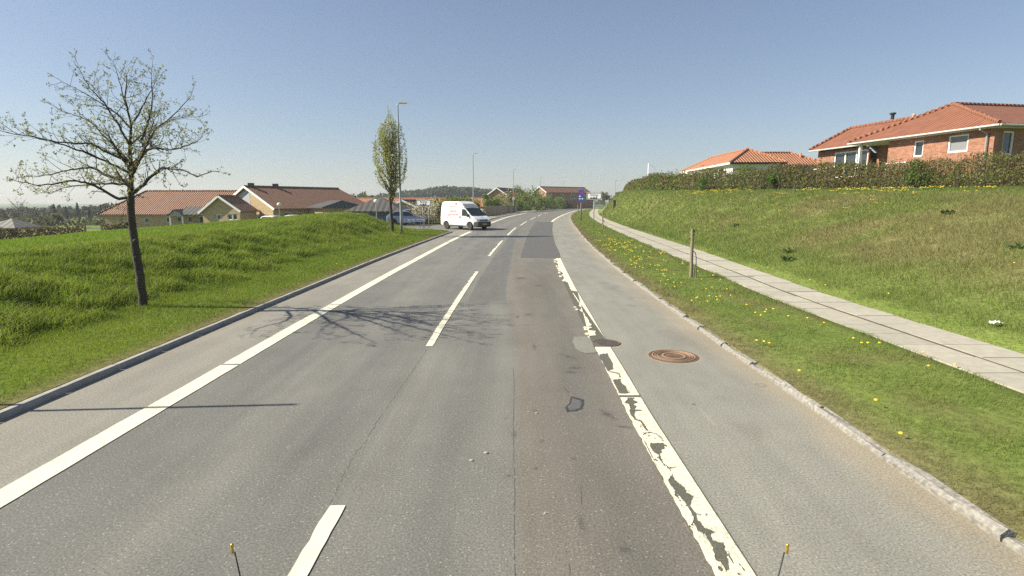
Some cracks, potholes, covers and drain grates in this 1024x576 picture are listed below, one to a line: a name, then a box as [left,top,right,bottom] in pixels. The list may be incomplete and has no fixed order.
manhole cover [593,339,620,347]
manhole cover [648,349,699,363]
